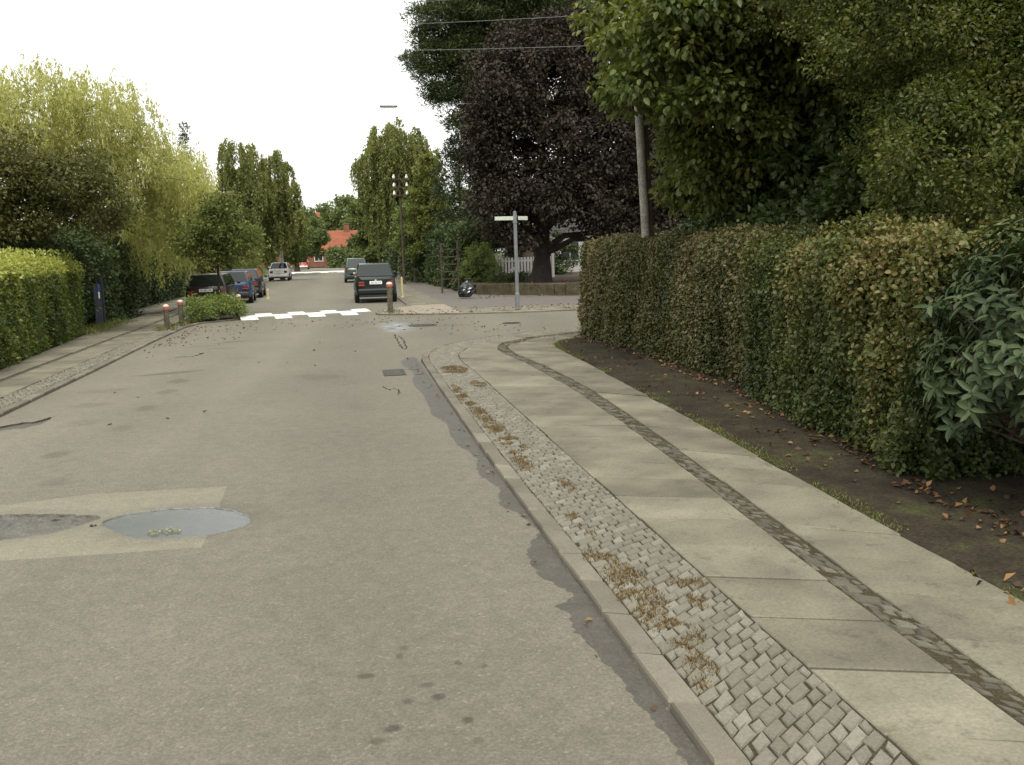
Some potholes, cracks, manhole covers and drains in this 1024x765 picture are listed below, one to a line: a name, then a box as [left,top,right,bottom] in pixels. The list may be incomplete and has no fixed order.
crack [0,416,54,431]
pothole [101,507,250,539]
